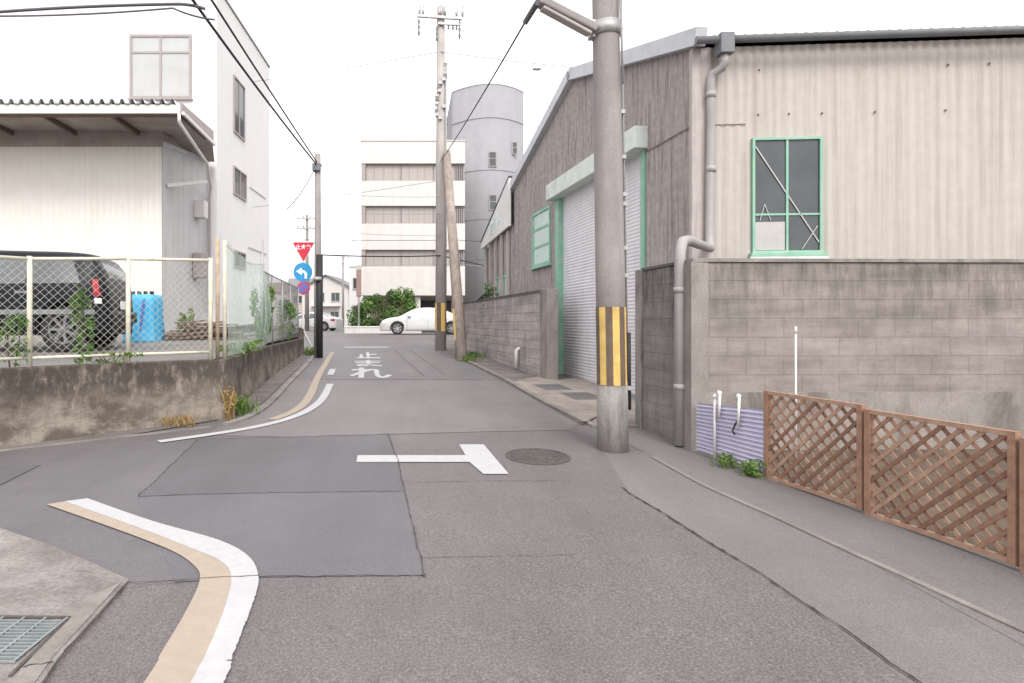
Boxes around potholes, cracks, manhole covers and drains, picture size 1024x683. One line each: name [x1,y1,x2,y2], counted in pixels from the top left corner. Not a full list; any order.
manhole cover [505,448,571,465]
drain grate [0,615,71,677]
